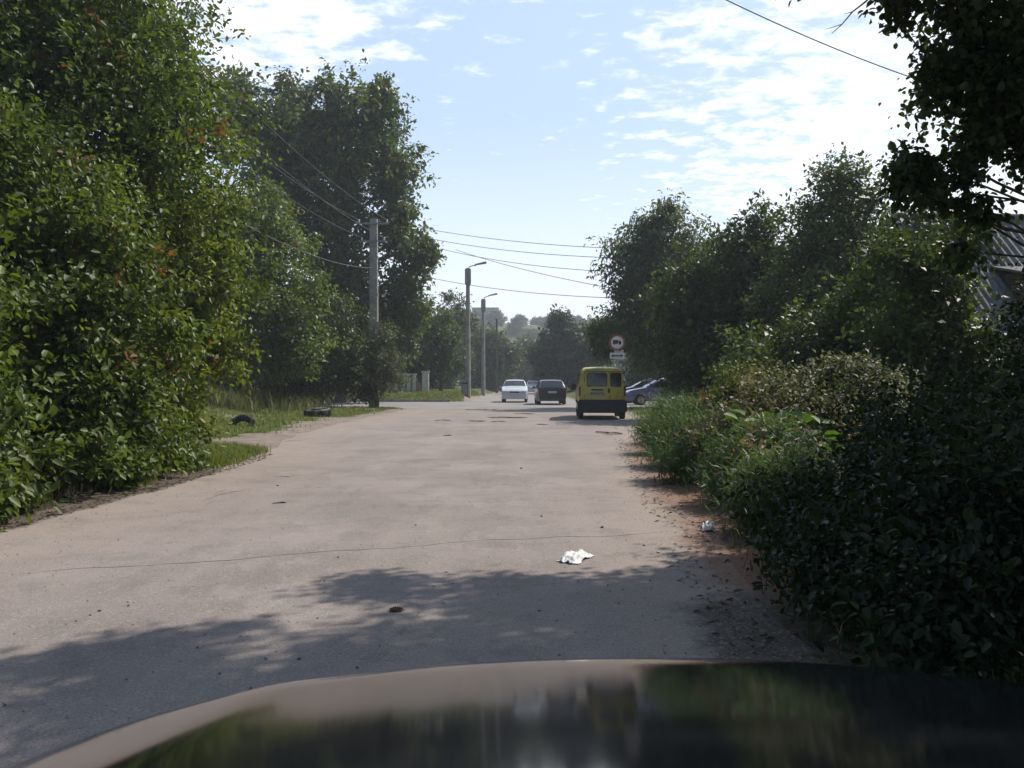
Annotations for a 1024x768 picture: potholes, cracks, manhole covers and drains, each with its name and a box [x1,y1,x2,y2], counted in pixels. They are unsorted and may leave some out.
crack [203,489,251,505]
crack [13,532,658,575]
